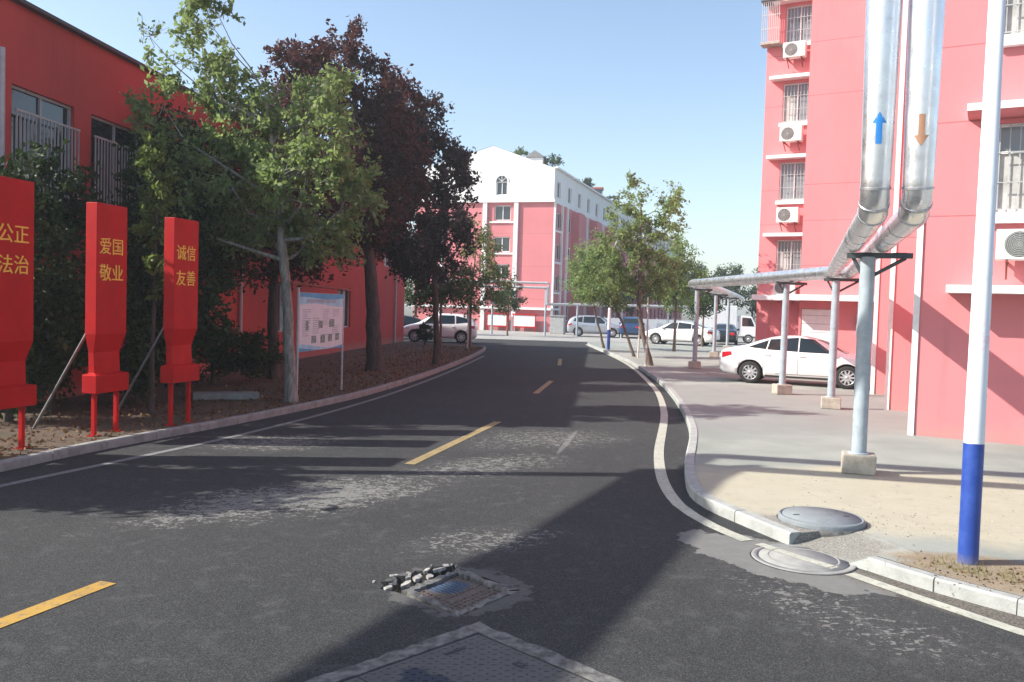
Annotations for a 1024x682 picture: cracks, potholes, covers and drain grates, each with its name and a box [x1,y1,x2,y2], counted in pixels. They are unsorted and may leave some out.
manhole cover [750,543,858,576]
manhole cover [776,506,868,537]
pothole [372,563,457,594]
manhole cover [306,621,623,682]
